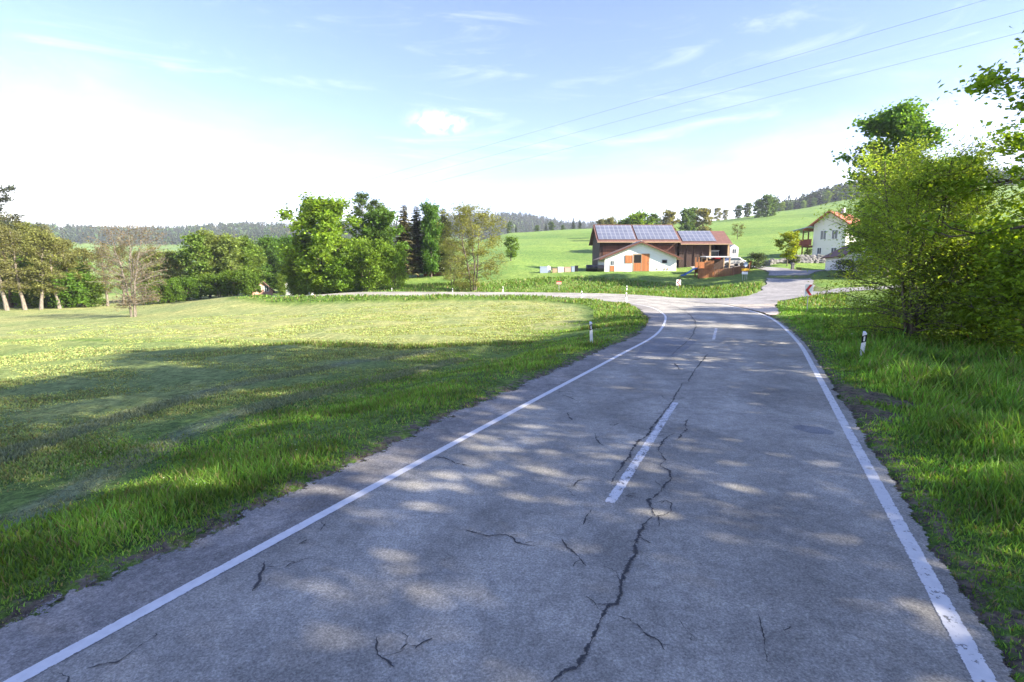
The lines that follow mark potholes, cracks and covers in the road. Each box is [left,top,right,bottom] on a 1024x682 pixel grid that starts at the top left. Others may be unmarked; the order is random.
crack [88,633,157,668]
crack [461,529,533,546]
crack [375,633,432,666]
crack [551,363,688,682]
crack [252,522,325,591]
